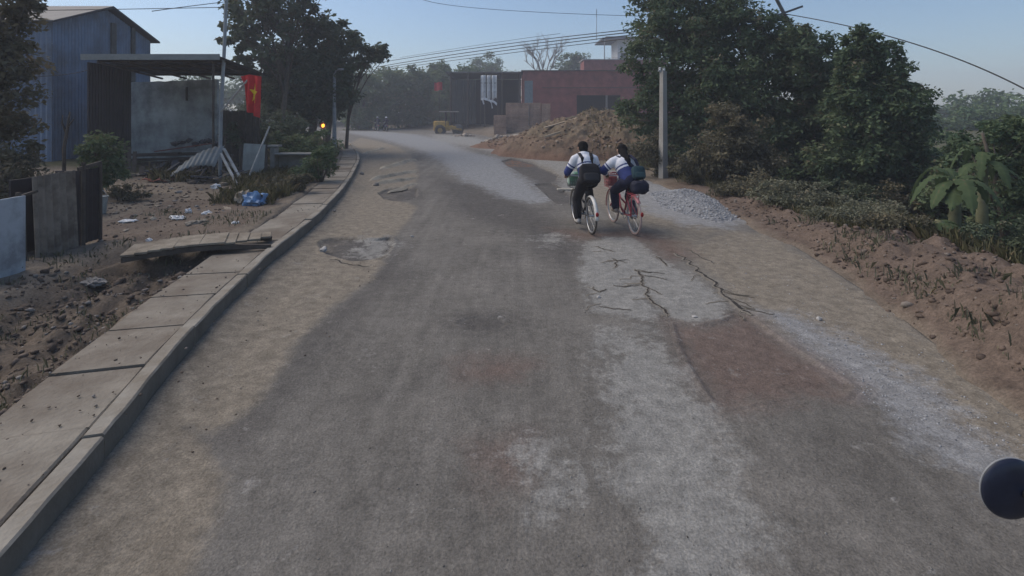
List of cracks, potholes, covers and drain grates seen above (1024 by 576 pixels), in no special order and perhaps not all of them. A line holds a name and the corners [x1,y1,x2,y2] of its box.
pothole [312,236,401,263]
crack [585,246,769,319]
pothole [374,187,422,202]
